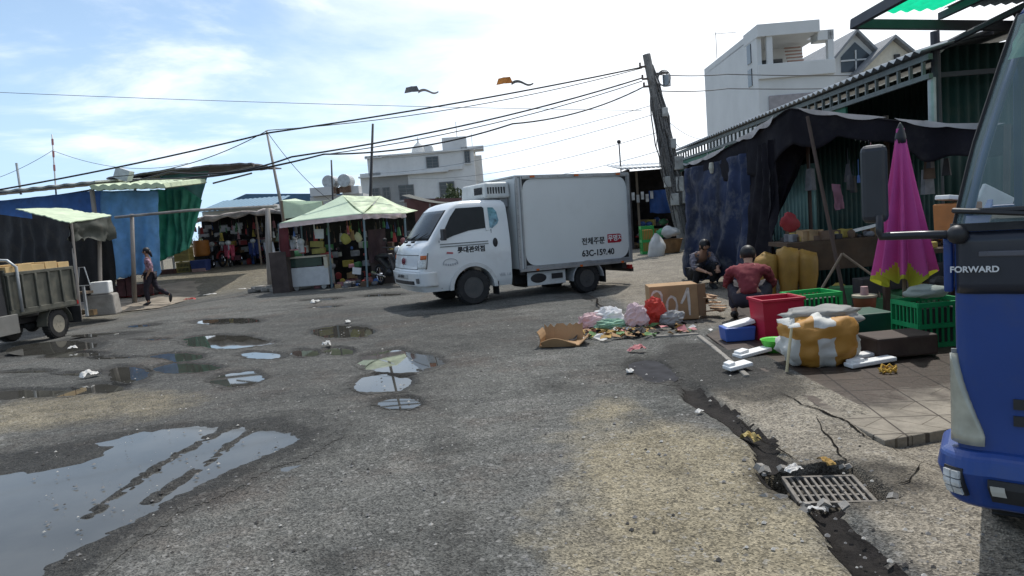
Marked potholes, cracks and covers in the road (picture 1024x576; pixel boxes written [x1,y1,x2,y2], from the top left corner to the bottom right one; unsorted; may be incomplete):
pothole [285,347,321,358]
pothole [351,345,452,377]
pothole [319,345,358,355]
drain grate [781,474,878,508]
pothole [346,372,420,394]
pothole [370,394,429,410]
pothole [186,317,274,325]
pothole [143,350,212,362]
pothole [301,323,383,340]
pothole [99,363,156,384]
pothole [202,368,272,390]
crack [784,394,938,486]
